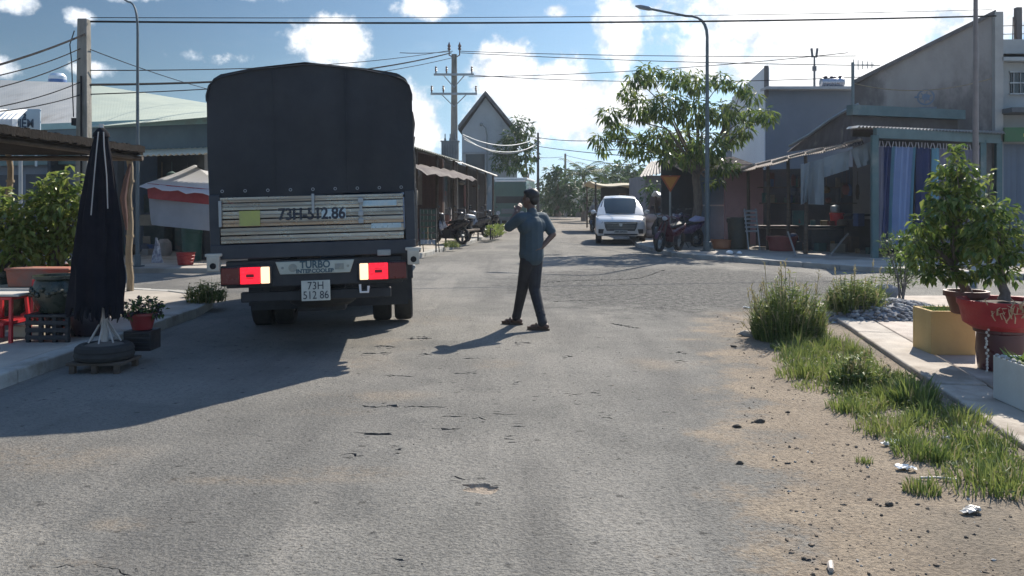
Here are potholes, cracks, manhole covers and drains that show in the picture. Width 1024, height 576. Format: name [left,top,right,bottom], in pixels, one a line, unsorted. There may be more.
crack [362,402,525,443]
crack [363,336,432,355]
pothole [462,483,499,494]
